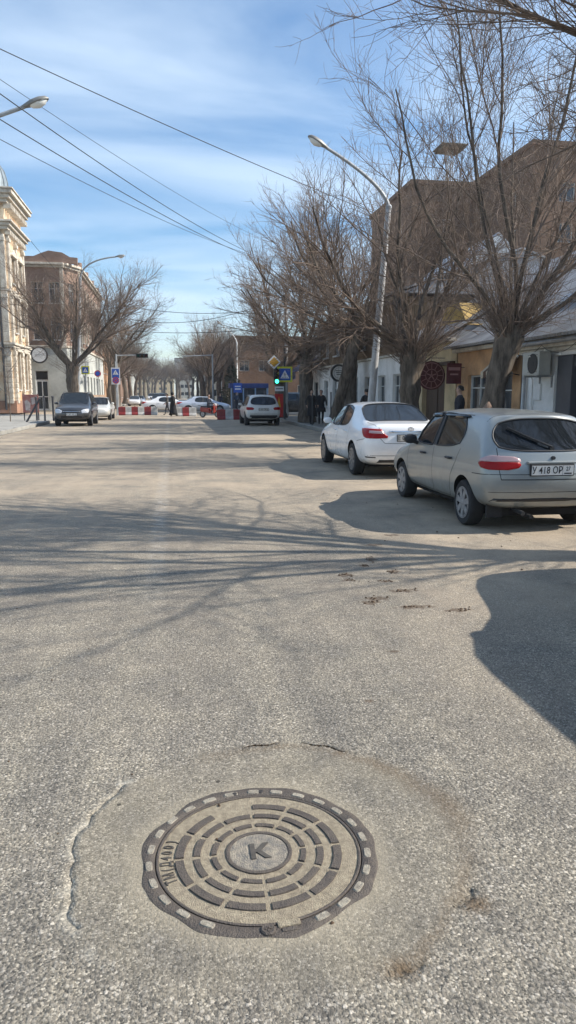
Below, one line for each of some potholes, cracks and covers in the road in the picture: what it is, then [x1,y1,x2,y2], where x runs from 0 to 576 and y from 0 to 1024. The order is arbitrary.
manhole cover [142,788,378,938]
crack [57,740,484,985]
